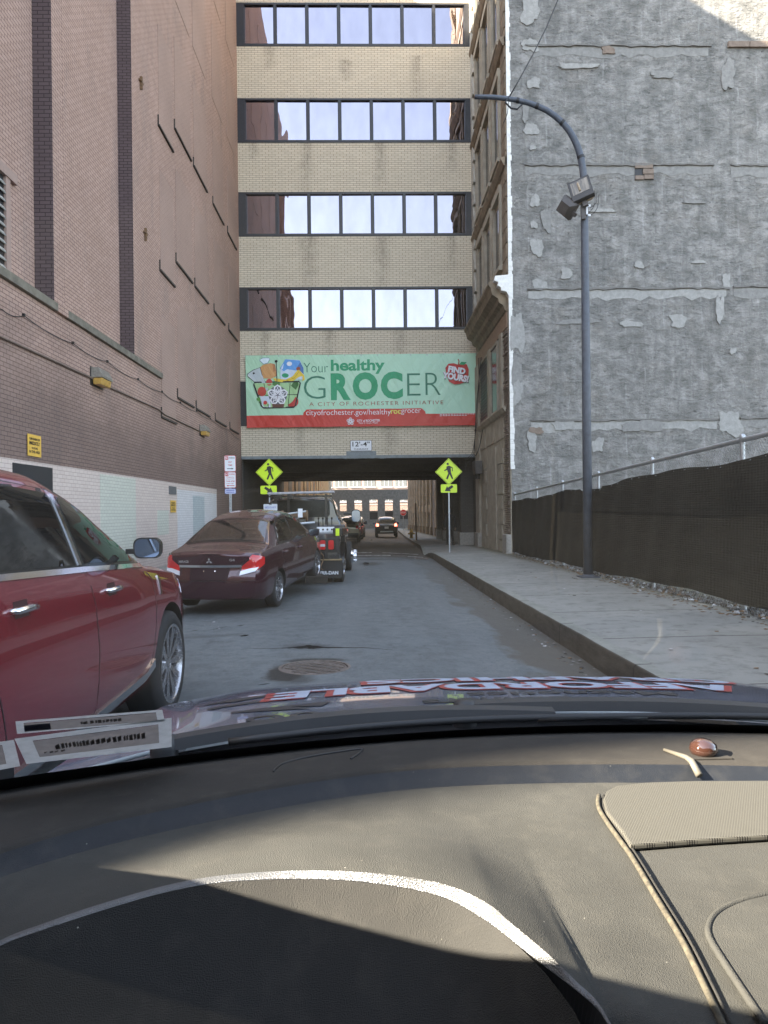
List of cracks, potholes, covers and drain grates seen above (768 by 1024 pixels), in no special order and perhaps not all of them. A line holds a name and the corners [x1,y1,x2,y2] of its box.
manhole cover [278,660,351,675]
